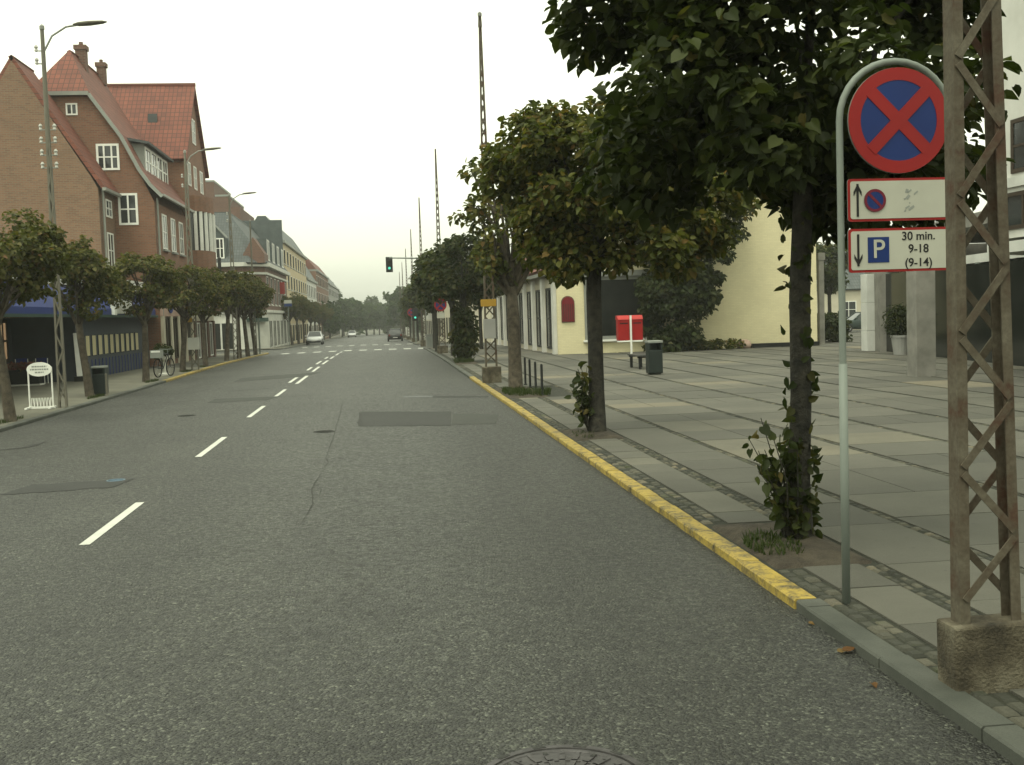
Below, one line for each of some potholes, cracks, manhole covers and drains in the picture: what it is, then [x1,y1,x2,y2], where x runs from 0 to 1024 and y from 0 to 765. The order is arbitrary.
crack [303,399,364,521]
manhole cover [487,745,644,765]
